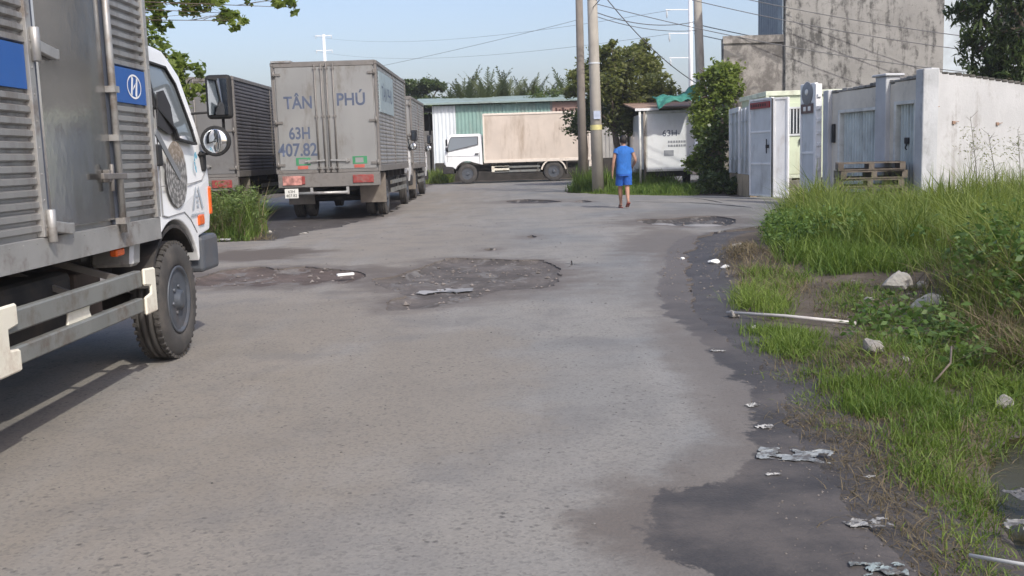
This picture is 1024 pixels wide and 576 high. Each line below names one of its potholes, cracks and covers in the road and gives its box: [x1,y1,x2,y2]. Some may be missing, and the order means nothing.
pothole [638,217,735,226]
pothole [195,268,365,287]
pothole [373,259,561,311]
